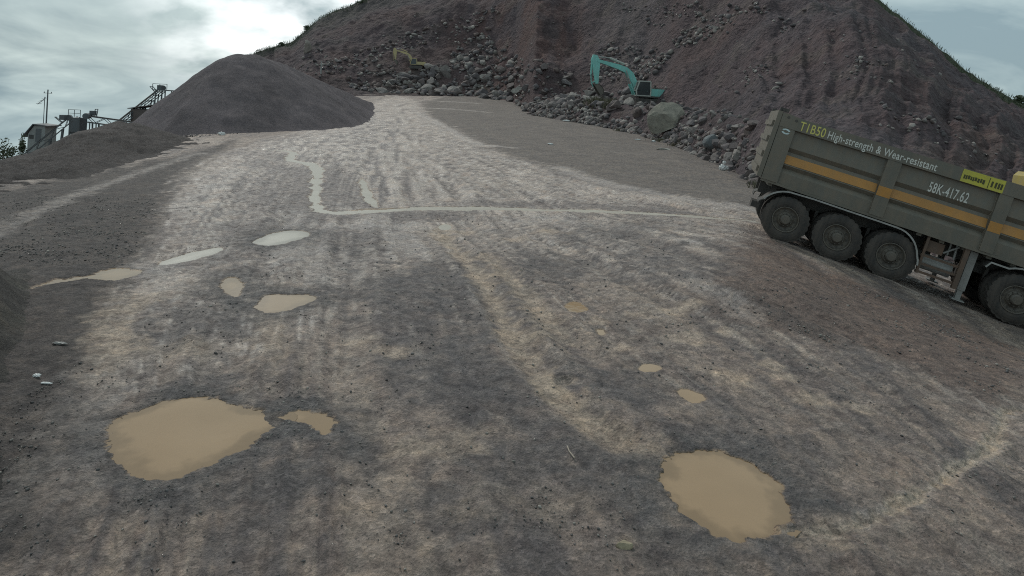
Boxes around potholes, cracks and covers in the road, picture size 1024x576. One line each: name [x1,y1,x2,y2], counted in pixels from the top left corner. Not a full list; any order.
pothole [623,429,833,570]
pothole [232,286,337,320]
pothole [229,225,331,252]
pothole [66,383,307,504]
